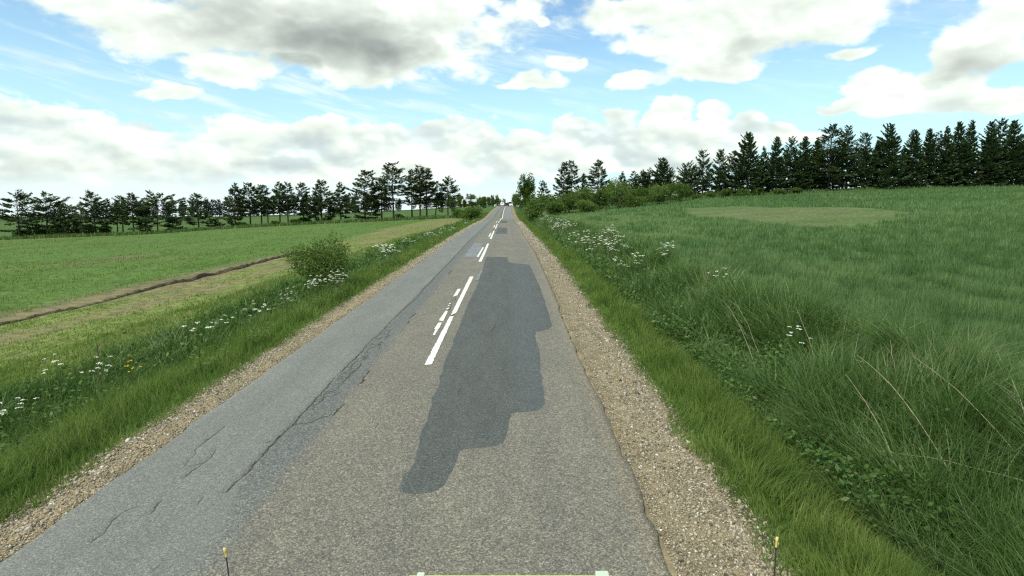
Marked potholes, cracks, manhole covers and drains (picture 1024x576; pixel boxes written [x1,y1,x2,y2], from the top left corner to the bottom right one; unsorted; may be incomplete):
crack [92,501,161,541]
crack [182,427,240,479]
